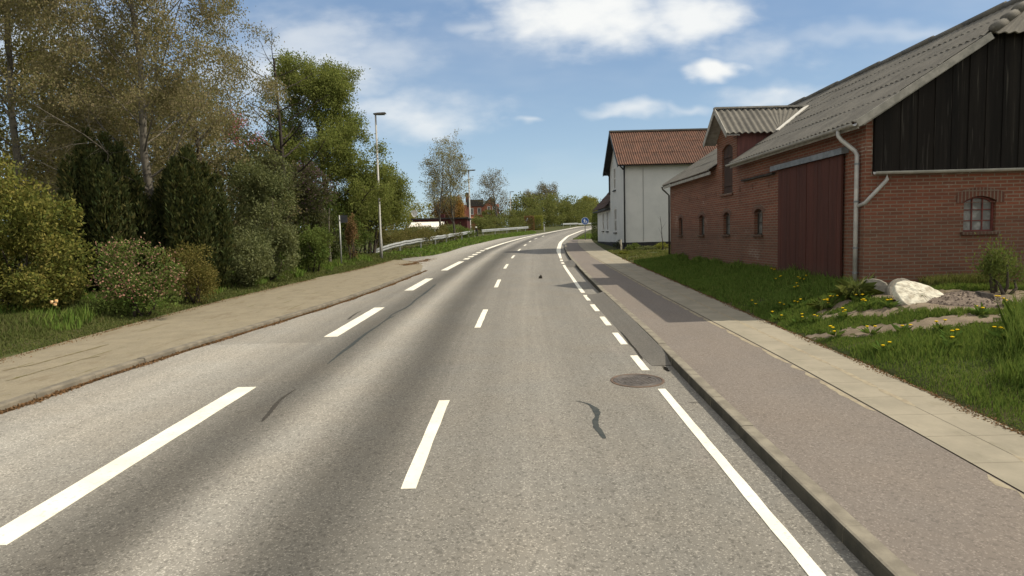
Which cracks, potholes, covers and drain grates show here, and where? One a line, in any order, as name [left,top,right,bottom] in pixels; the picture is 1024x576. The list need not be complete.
manhole cover [610,374,665,388]
